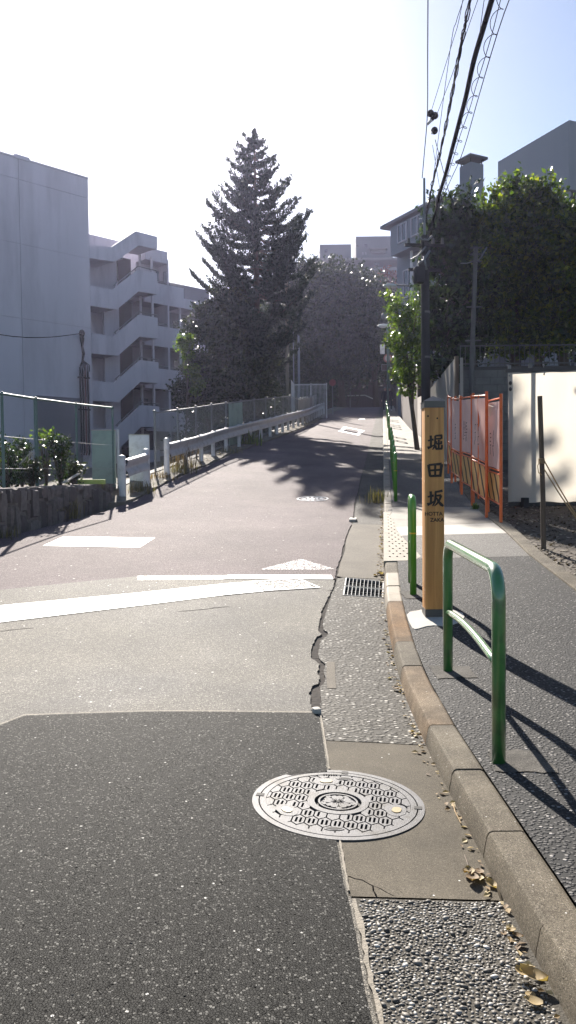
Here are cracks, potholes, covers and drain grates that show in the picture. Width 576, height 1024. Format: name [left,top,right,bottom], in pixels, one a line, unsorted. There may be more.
crack [309,454,368,711]
drain grate [344,577,384,589]
manhole cover [252,770,425,841]
crack [348,876,396,899]
